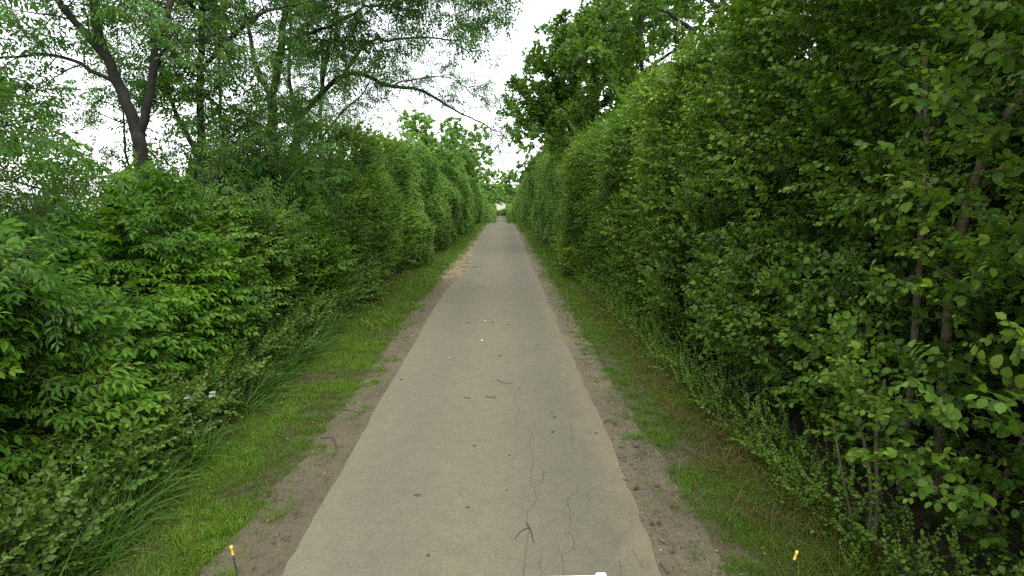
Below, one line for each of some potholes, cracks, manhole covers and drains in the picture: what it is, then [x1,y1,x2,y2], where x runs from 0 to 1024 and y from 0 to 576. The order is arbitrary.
crack [562,481,606,576]
crack [515,387,545,576]
